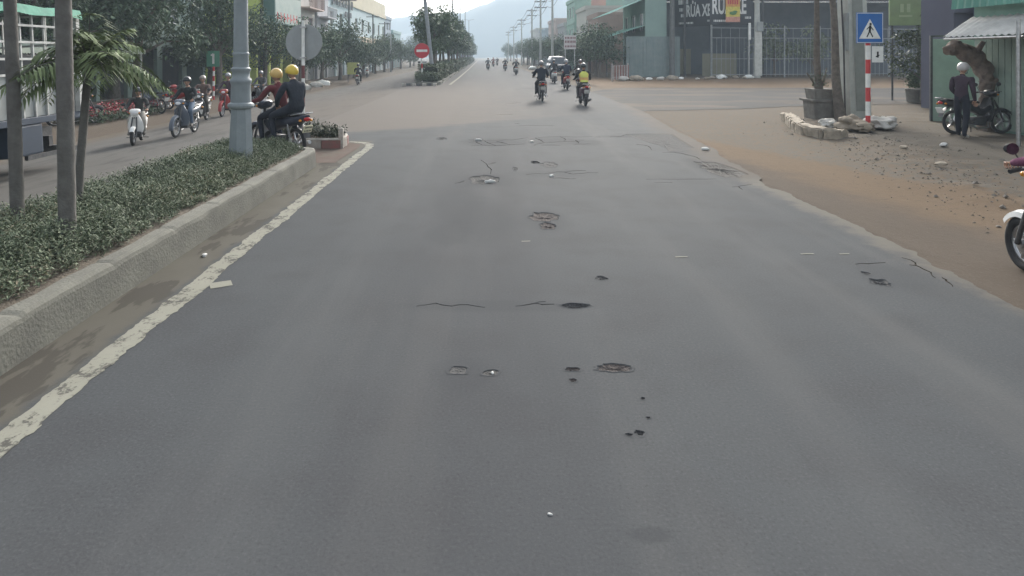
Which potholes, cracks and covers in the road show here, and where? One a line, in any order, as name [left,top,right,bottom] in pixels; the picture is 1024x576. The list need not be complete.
pothole [593,362,636,373]
pothole [527,212,561,222]
pothole [478,368,502,376]
pothole [468,175,501,185]
pothole [445,364,470,375]
crack [458,102,579,183]
